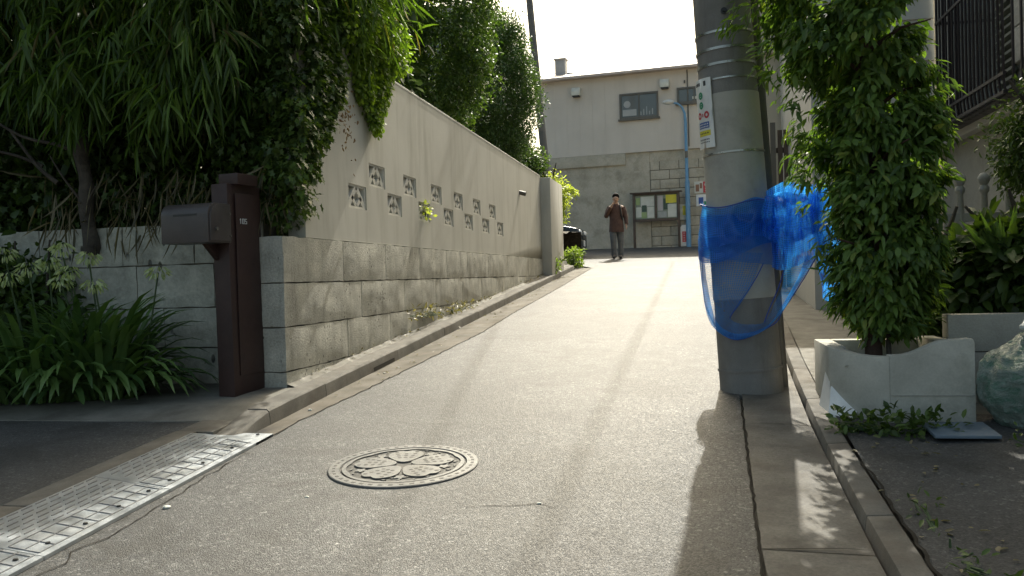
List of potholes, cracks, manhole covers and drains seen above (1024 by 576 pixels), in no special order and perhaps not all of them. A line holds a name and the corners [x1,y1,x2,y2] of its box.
manhole cover [327,445,479,489]
